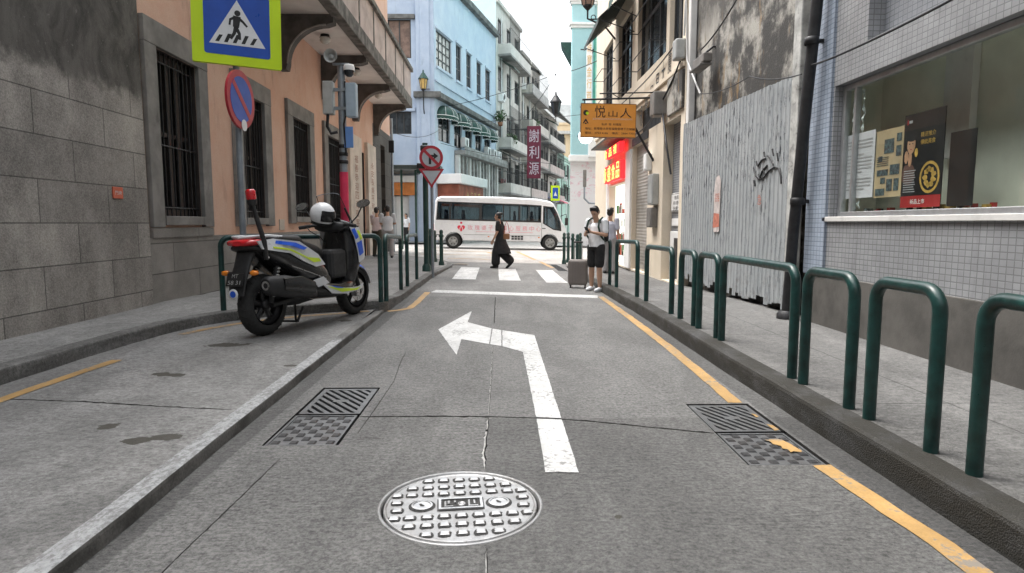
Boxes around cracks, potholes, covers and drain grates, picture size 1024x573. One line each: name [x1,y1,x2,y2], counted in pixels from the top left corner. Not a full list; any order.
drain grate [295,388,380,415]
manhole cover [377,471,543,546]
drain grate [686,404,785,432]
